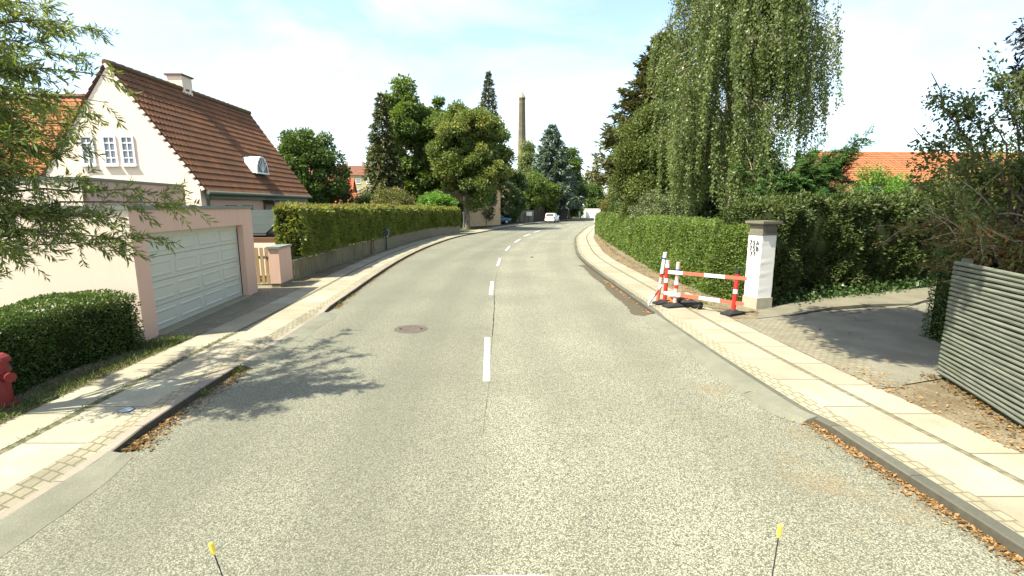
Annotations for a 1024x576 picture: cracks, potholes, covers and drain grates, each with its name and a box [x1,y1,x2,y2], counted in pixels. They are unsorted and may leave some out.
manhole cover [394,325,428,333]
